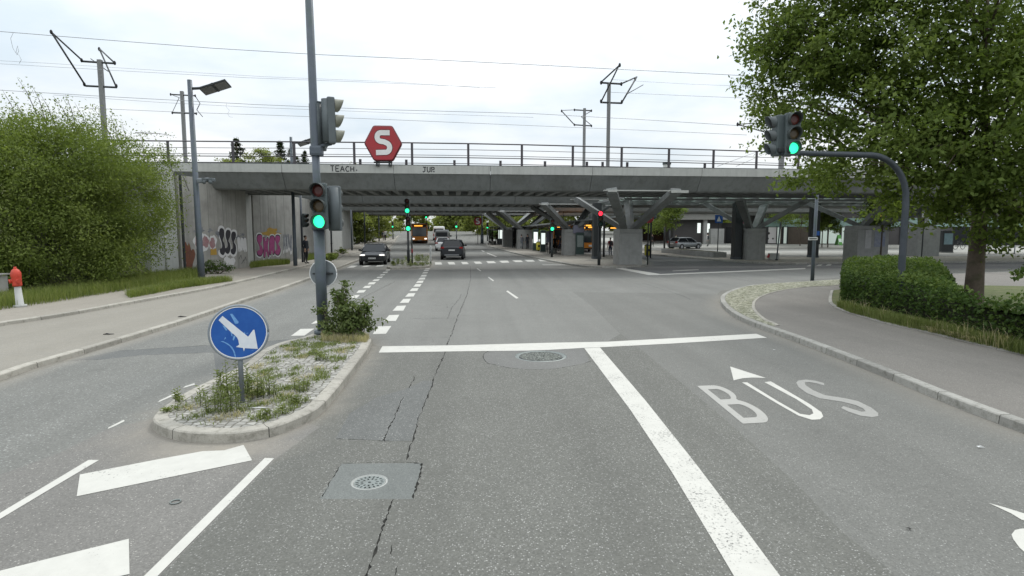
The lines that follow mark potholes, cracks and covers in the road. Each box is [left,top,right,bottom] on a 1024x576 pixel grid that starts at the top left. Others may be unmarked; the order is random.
drain grate [351,474,388,490]
crack [365,500,397,576]
crack [338,268,471,498]
manhole cover [515,351,567,362]
